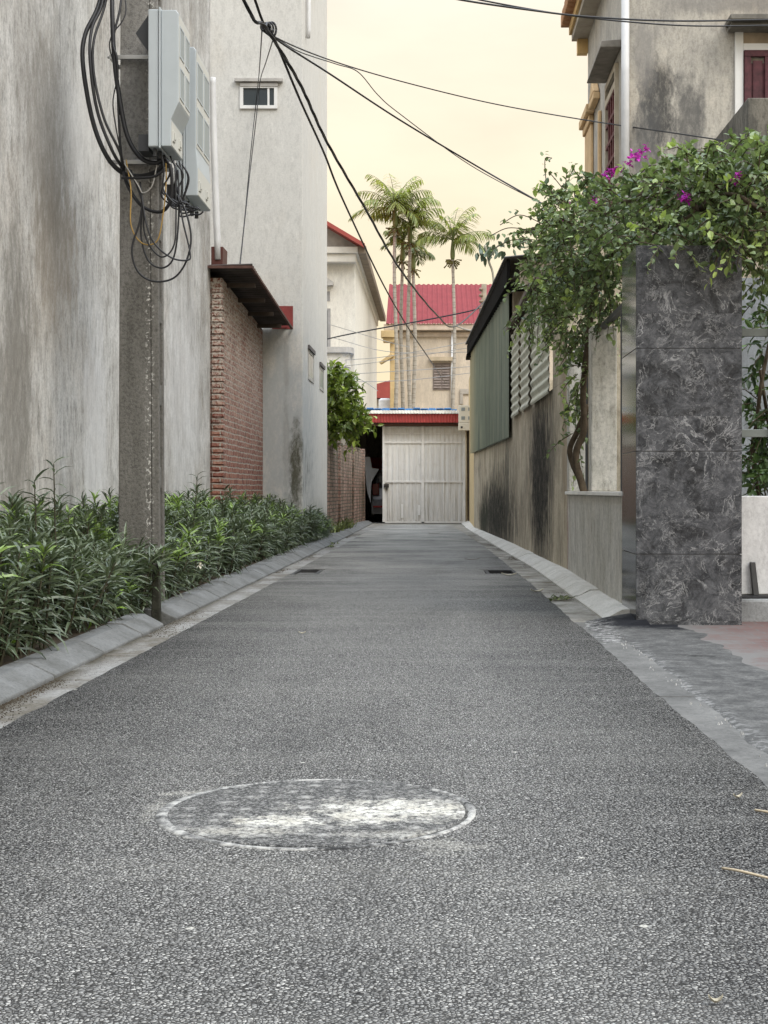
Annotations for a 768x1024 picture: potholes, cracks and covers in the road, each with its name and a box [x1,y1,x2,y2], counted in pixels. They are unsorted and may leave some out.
manhole cover [155,779,476,851]
